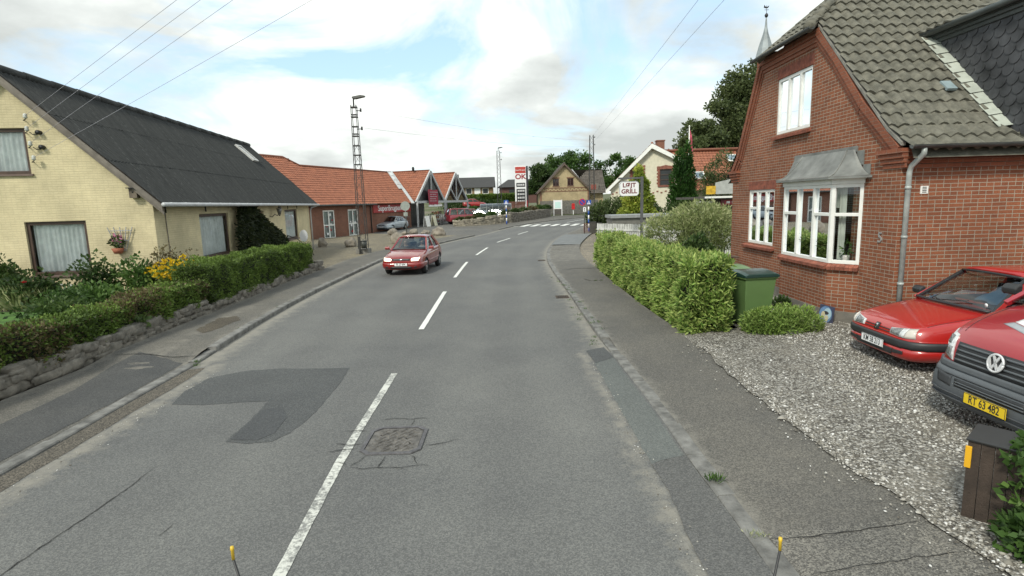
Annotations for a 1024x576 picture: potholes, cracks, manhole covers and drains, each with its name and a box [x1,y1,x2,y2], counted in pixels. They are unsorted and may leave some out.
crack [811,551,965,575]
crack [0,469,152,576]
manhole cover [359,426,428,455]
crack [330,417,454,469]
